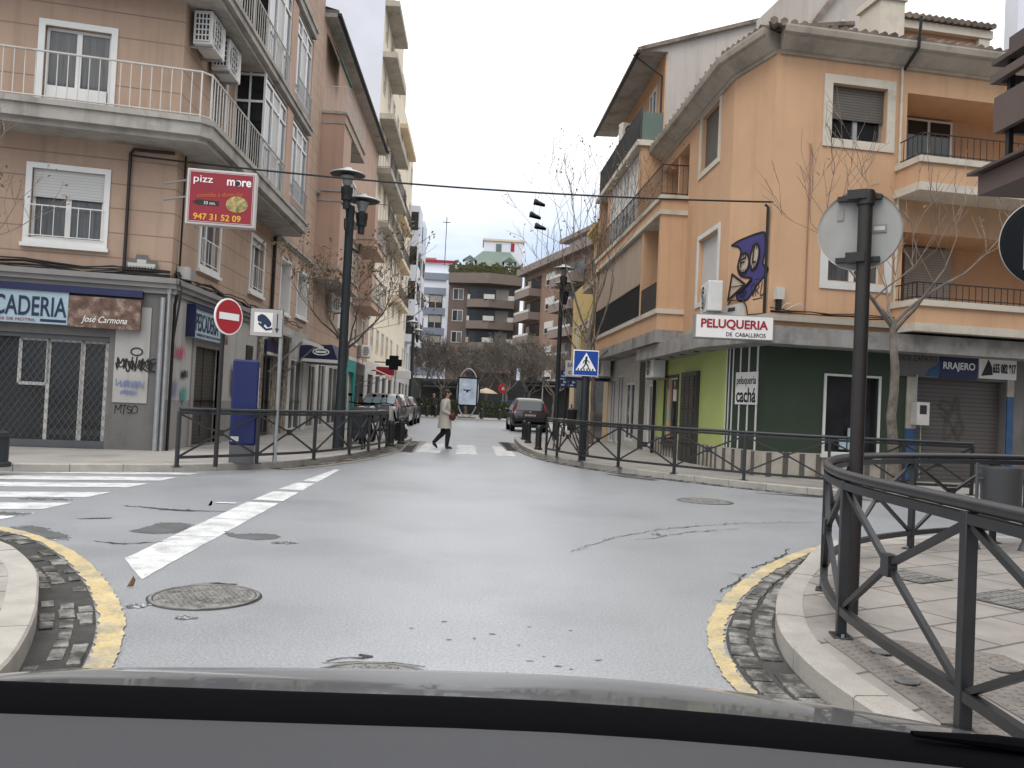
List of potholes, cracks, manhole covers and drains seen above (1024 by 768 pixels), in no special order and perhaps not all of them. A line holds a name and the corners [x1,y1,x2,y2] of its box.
manhole cover [146,584,262,611]
crack [717,548,790,603]
manhole cover [320,661,423,670]
crack [571,521,821,552]
